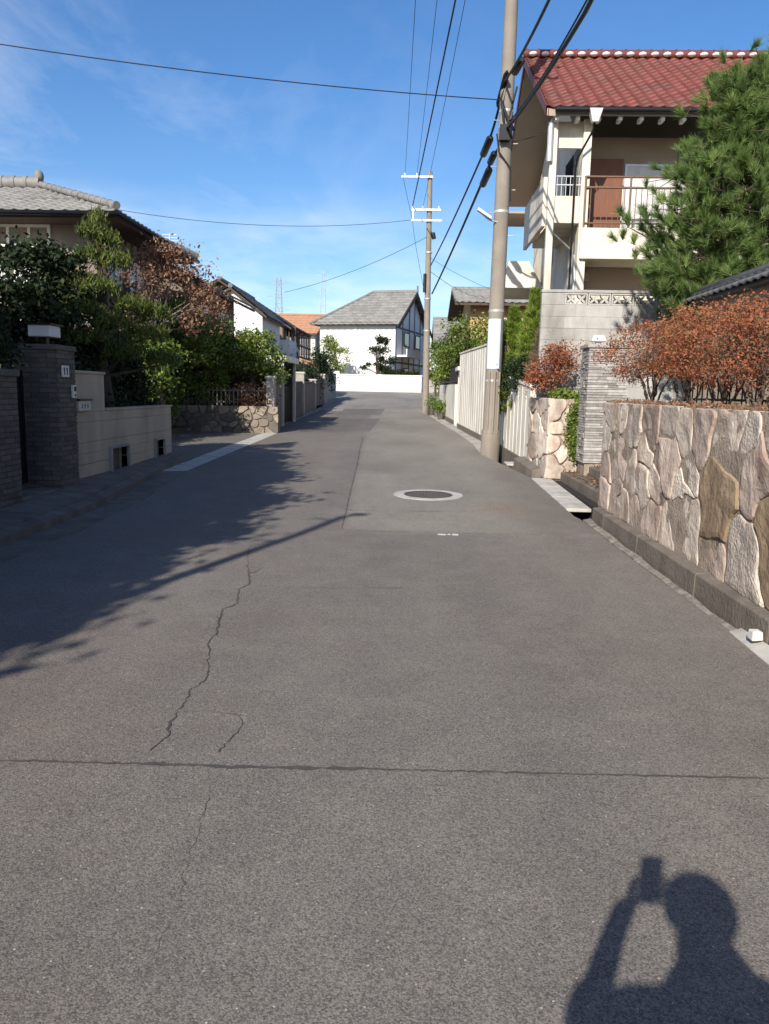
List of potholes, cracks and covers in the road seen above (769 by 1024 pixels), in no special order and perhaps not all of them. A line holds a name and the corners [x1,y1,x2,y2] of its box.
crack [149,546,259,752]
manhole cover [393,489,463,500]
crack [143,772,223,973]
